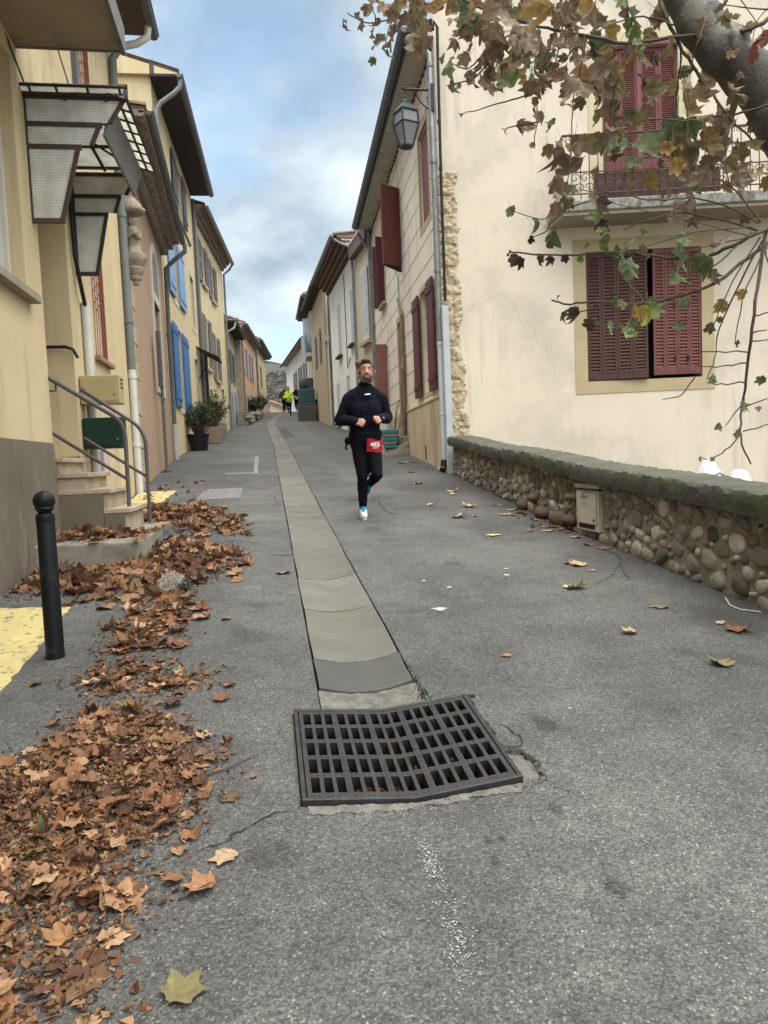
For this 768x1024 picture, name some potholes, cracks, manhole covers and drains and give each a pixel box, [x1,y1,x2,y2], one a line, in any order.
drain grate [294,693,523,807]
crack [201,801,302,850]
crack [470,699,569,791]
